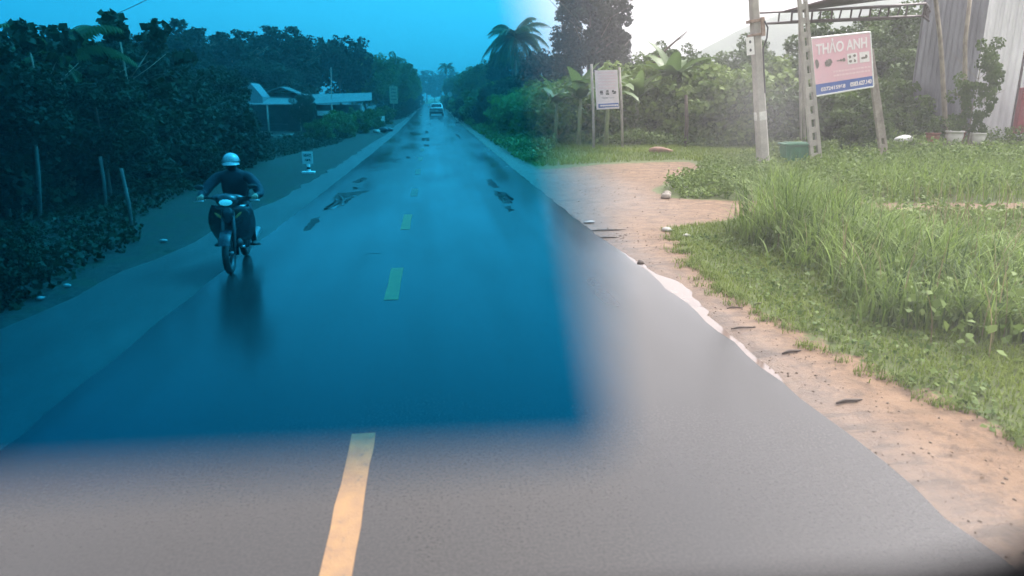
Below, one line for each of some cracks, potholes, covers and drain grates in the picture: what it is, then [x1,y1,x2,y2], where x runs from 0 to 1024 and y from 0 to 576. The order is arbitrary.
pothole [494,191,514,204]
pothole [322,191,369,211]
pothole [303,217,320,231]
